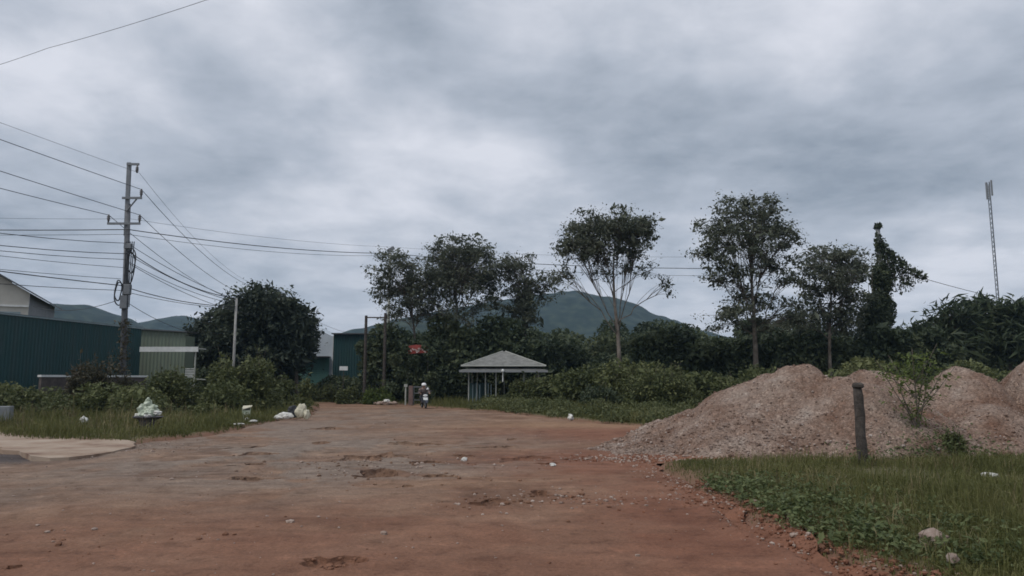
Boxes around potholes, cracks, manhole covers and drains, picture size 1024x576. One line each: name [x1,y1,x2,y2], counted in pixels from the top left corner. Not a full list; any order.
pothole [467,498,506,506]
pothole [299,555,370,570]
pothole [352,468,410,478]
